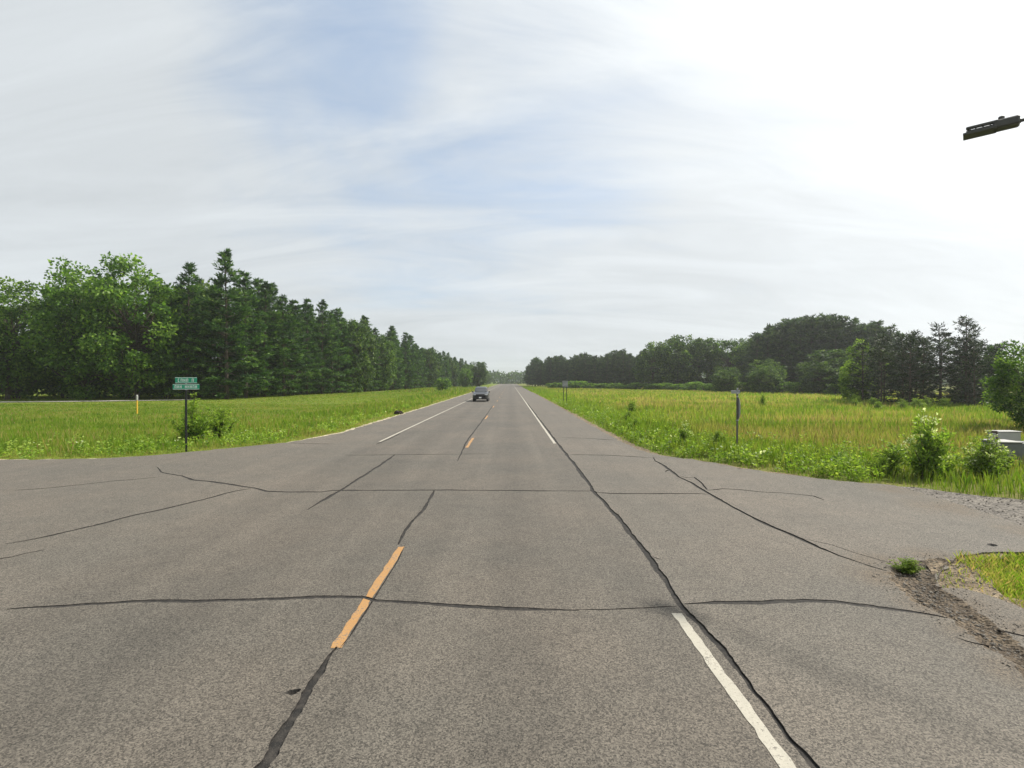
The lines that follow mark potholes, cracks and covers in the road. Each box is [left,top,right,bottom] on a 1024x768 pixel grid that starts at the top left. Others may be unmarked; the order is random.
crack [572,438,894,571]
crack [0,434,539,649]
crack [684,599,947,618]
pothole [886,558,1024,678]
